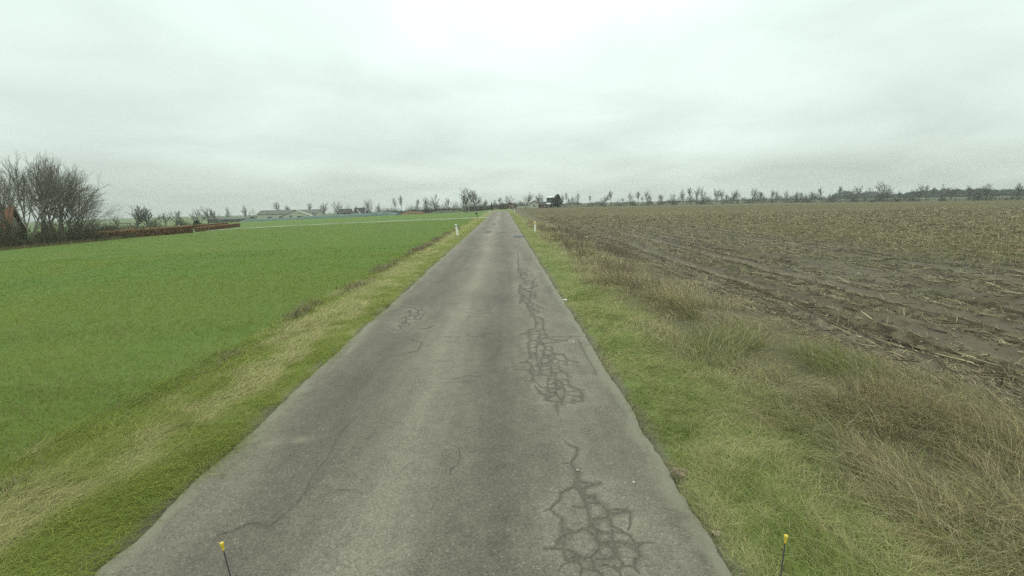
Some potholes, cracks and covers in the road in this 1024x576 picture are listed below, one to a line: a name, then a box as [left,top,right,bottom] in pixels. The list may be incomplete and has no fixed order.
crack [517,259,597,410]
crack [547,448,645,574]
crack [237,430,344,530]
